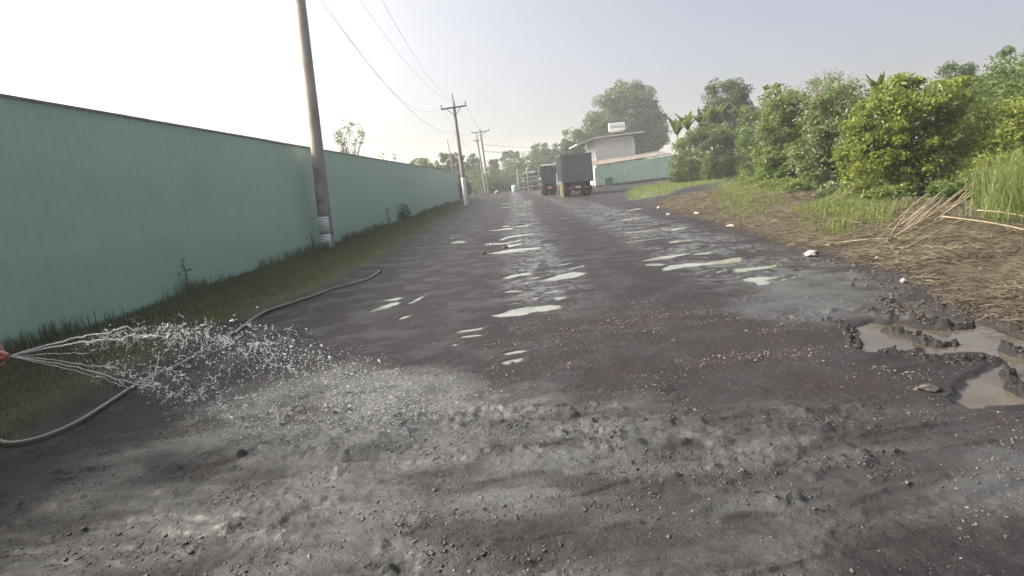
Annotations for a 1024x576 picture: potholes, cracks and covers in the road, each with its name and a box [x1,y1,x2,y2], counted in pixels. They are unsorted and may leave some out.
pothole [845,313,1024,411]
pothole [890,299,963,324]
